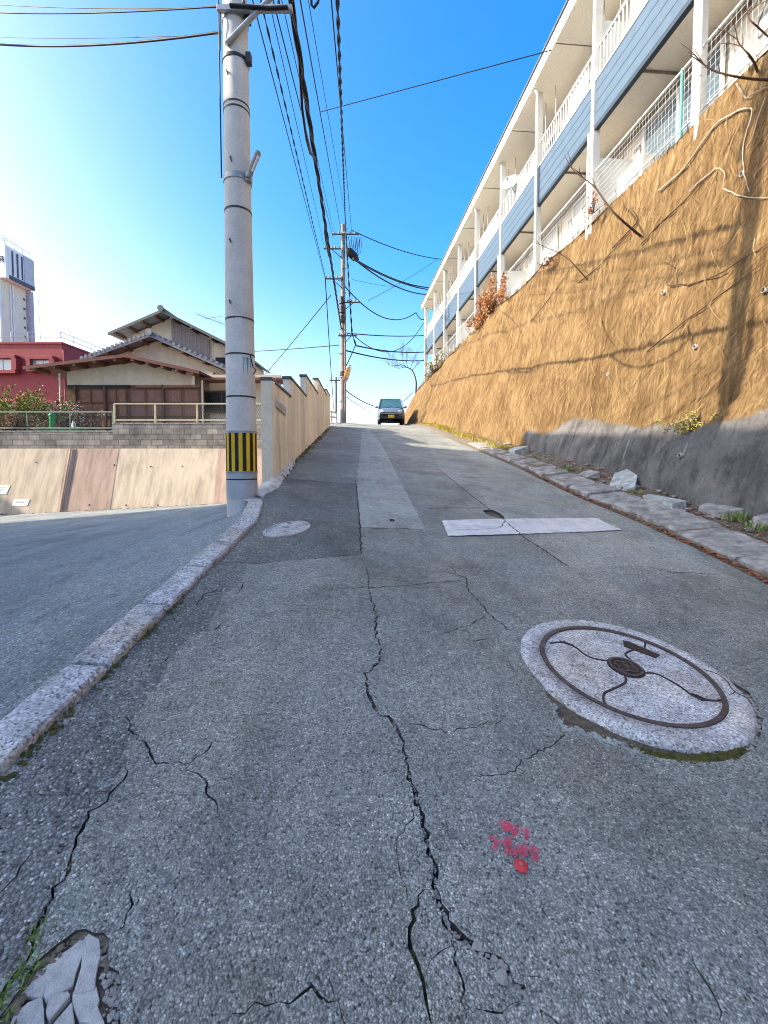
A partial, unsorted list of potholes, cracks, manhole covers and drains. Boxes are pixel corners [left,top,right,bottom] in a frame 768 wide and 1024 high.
crack [341,566,566,1024]
crack [0,710,218,998]
manhole cover [521,620,758,755]
manhole cover [262,521,310,538]
pothole [483,510,504,519]
pothole [0,929,121,1024]
